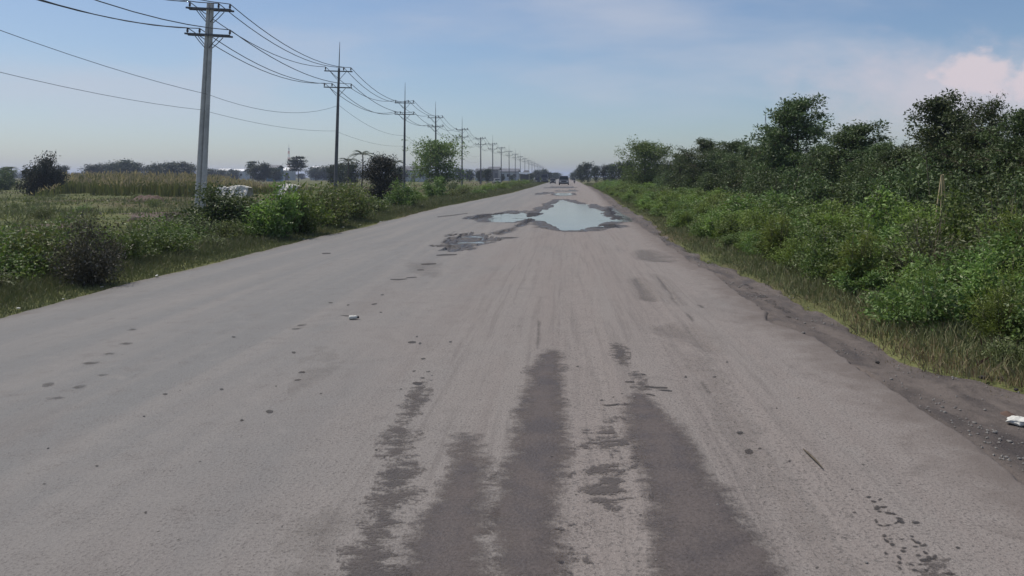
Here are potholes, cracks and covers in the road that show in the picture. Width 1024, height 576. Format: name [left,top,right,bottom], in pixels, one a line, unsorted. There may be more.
pothole [918,558,953,576]
pothole [429,232,503,252]
pothole [516,199,630,232]
pothole [473,212,527,223]
